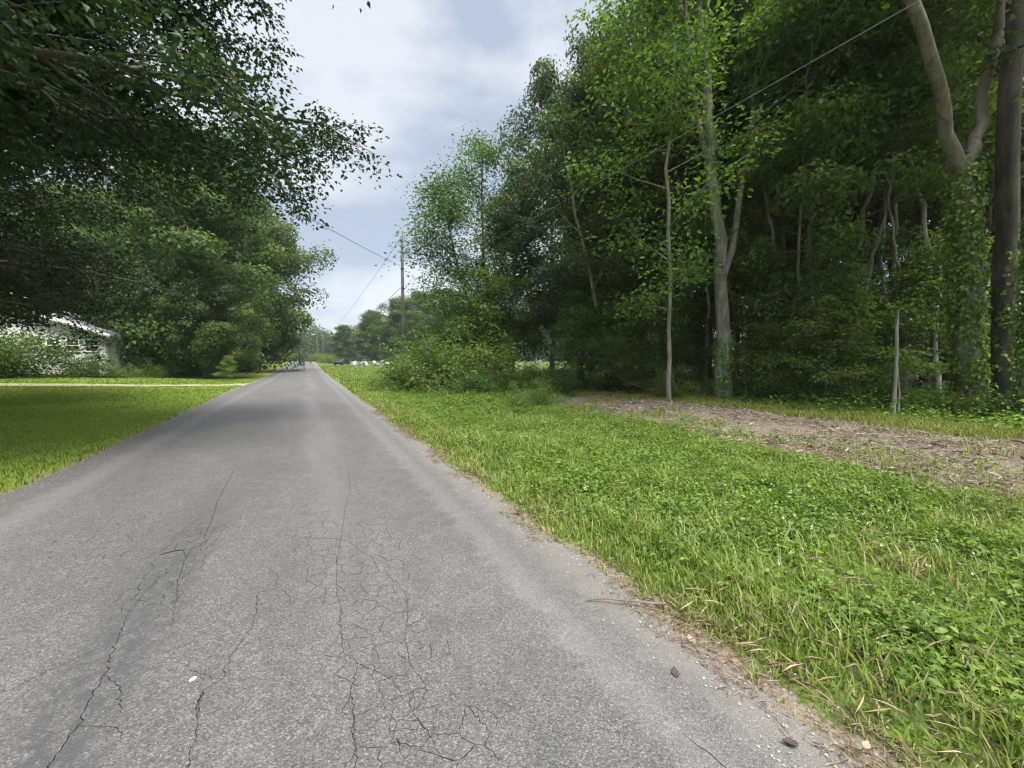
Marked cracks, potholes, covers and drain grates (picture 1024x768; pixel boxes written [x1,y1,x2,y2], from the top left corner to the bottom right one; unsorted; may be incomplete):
crack [13,466,236,768]
